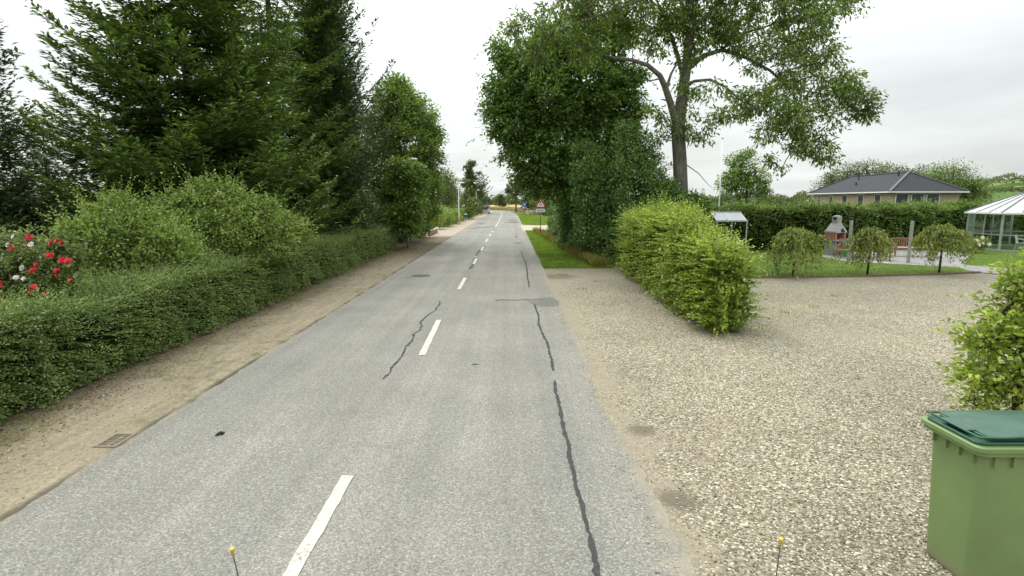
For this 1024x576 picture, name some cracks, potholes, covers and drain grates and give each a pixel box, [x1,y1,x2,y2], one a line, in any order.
drain grate [93,433,137,448]
